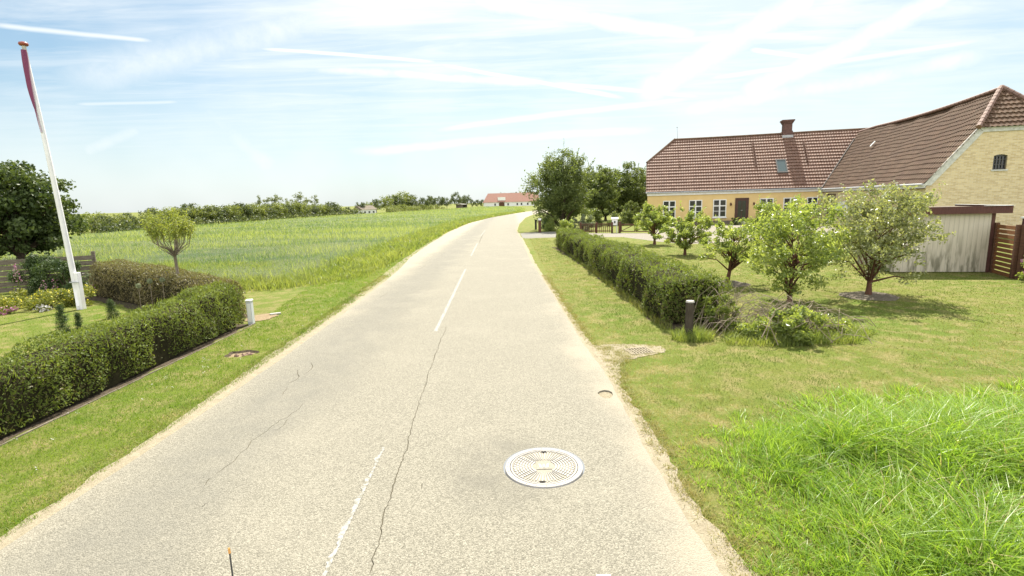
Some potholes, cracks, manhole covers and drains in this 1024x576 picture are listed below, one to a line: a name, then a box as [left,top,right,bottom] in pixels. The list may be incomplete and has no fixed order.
crack [202,364,313,507]
drain grate [624,347,656,355]
manhole cover [505,448,583,489]
crack [370,330,446,573]
